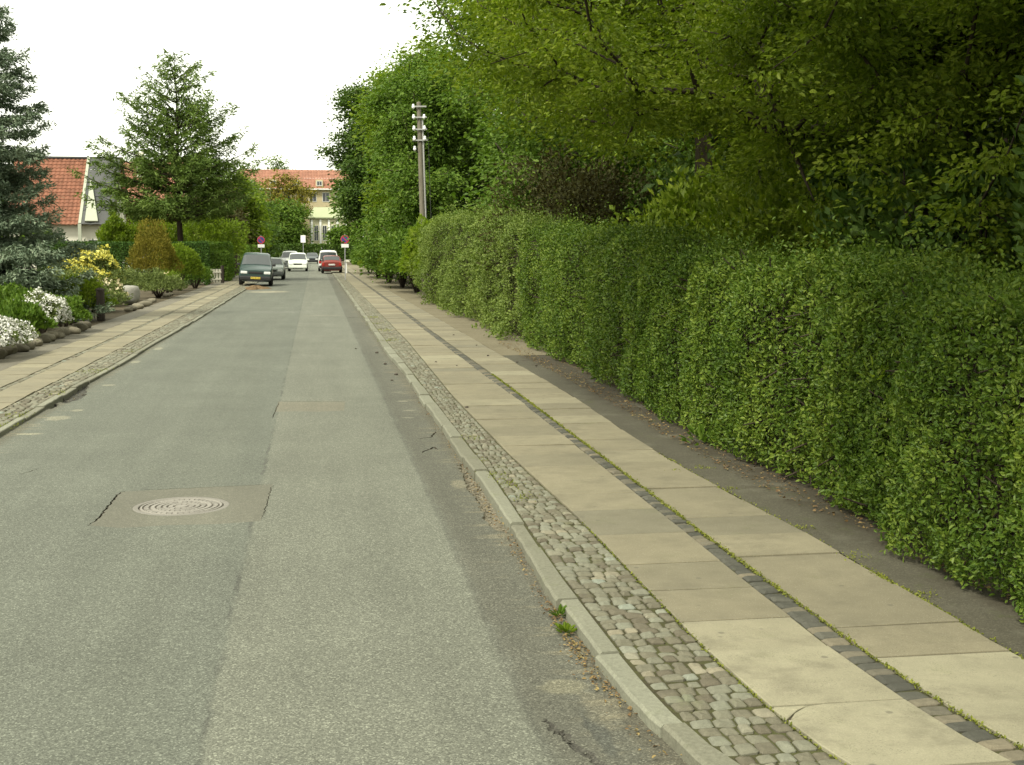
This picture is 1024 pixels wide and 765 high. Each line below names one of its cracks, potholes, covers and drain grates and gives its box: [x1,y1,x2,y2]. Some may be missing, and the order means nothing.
pothole [62,384,89,403]
crack [273,401,345,417]
crack [89,484,271,525]
crack [541,719,607,765]
manhole cover [132,497,230,516]
